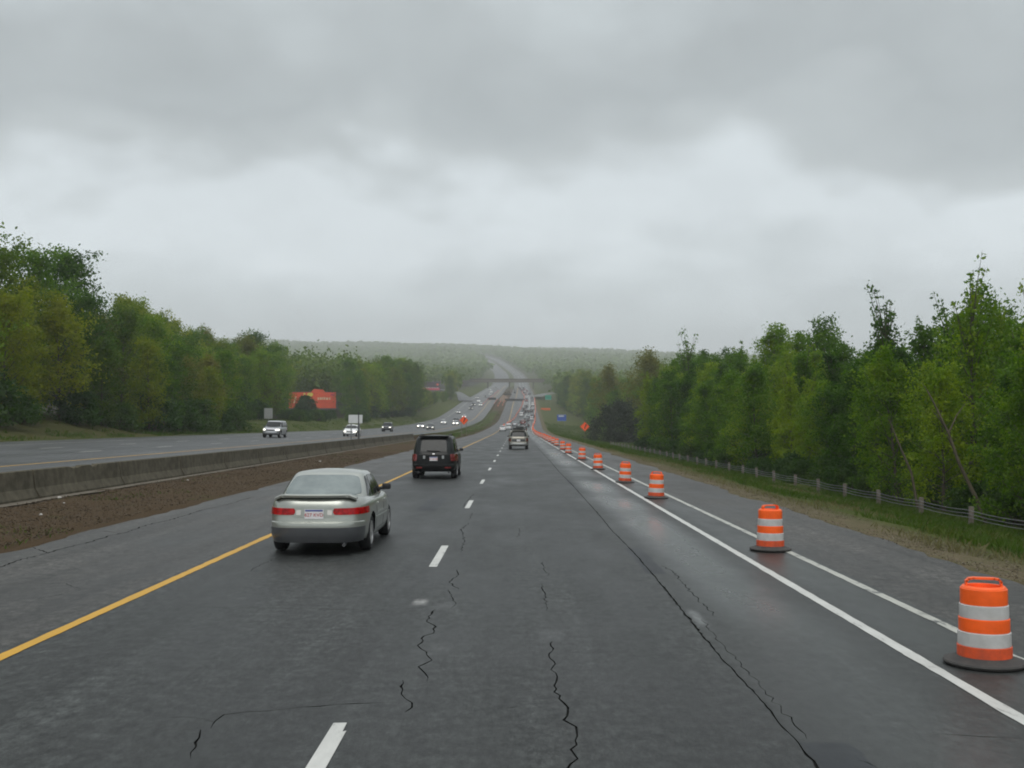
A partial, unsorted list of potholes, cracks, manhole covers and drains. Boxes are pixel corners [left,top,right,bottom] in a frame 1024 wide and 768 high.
crack [190,703,363,759]
crack [537,447,819,768]
crack [399,494,474,712]
